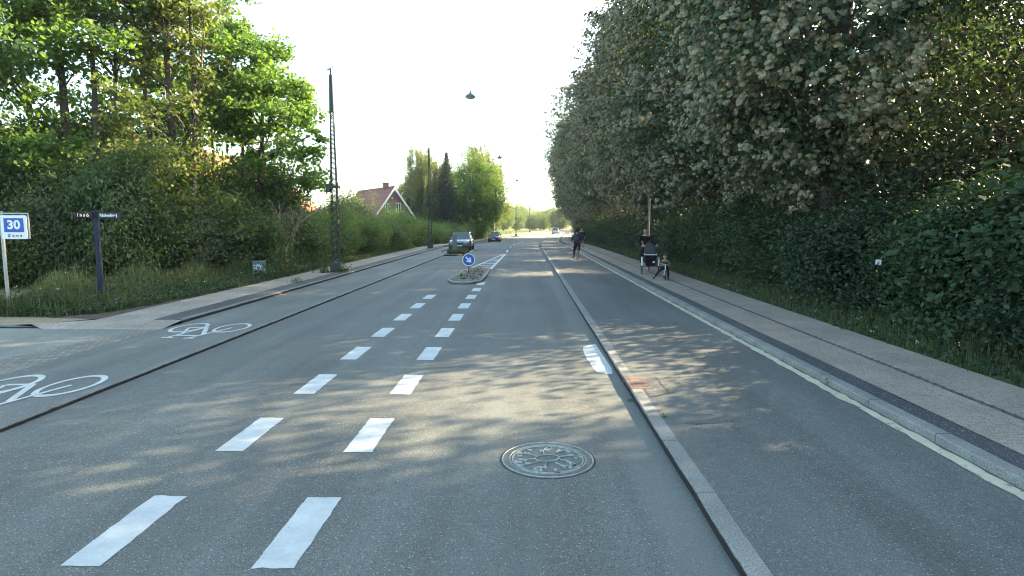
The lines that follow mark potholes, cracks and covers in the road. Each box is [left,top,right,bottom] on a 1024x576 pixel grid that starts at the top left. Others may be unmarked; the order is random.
manhole cover [500,442,596,479]
